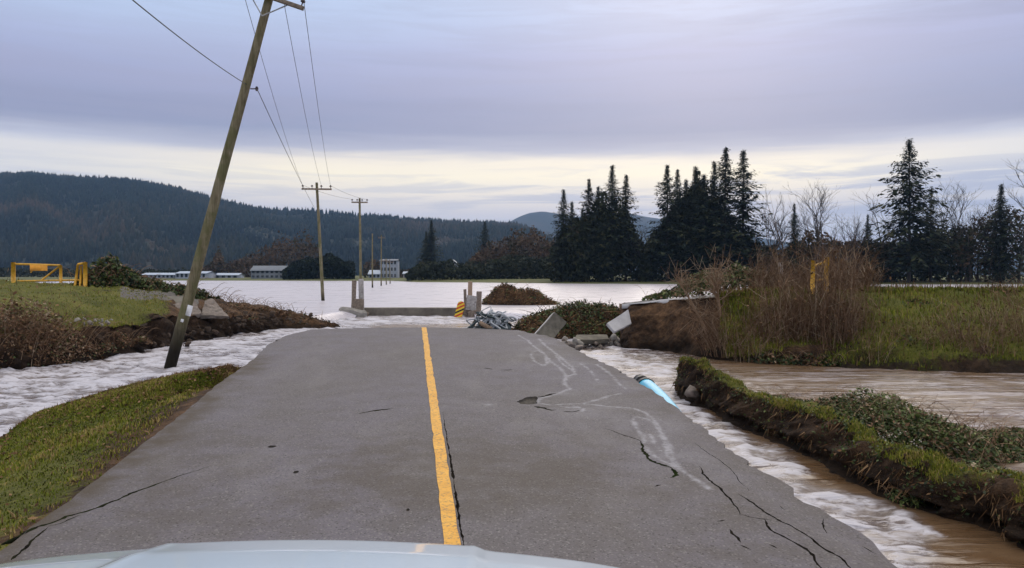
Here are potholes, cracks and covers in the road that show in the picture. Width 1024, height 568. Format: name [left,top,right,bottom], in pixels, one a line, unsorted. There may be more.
pothole [517,393,555,404]
crack [1,468,203,560]
crack [699,446,872,568]
crack [611,430,679,487]
crack [444,420,464,545]
